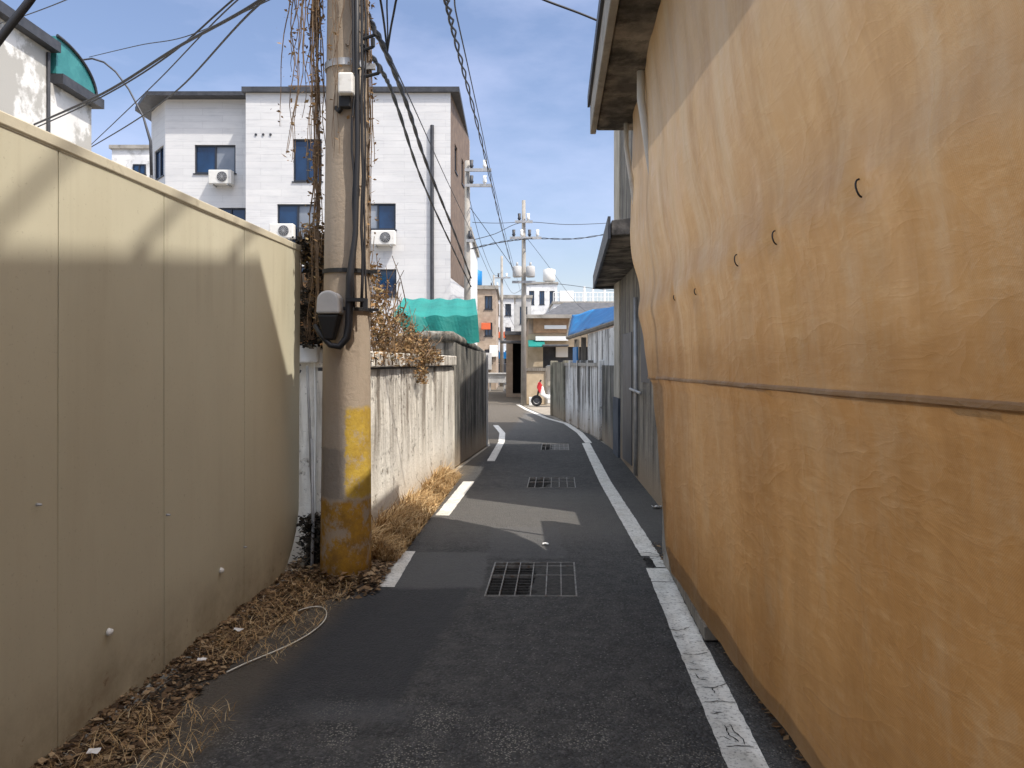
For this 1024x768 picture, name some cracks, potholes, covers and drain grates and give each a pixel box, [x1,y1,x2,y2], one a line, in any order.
drain grate [484,562,577,596]
drain grate [527,477,576,488]
crack [668,627,748,746]
